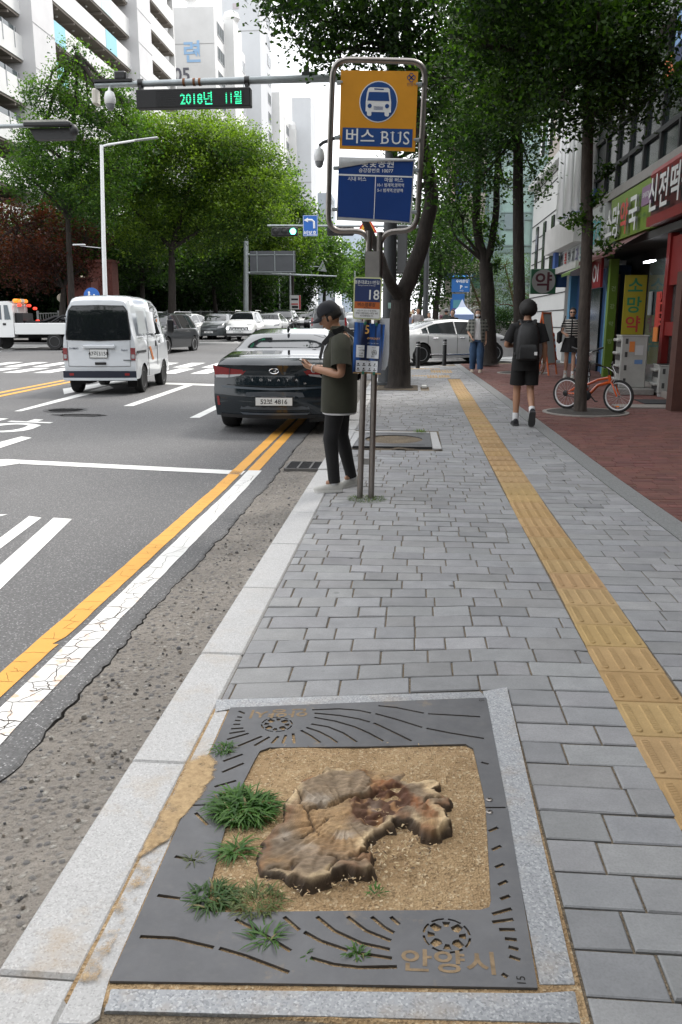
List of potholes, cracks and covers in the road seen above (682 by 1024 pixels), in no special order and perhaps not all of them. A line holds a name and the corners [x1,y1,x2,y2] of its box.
drain grate [284,461,323,472]
